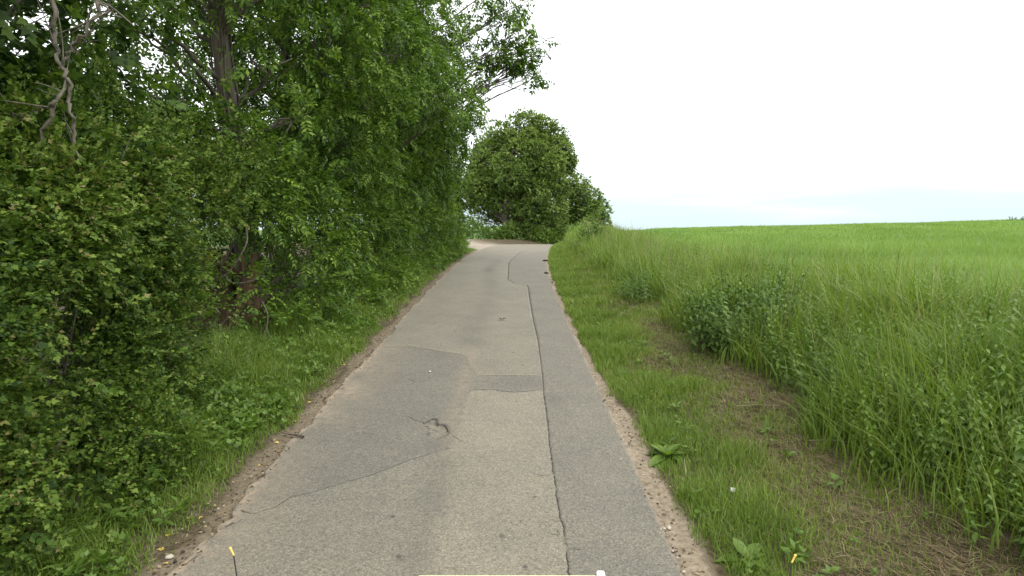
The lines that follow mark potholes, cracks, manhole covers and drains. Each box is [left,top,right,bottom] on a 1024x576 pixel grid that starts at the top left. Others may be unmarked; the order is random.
crack [218,433,463,530]
